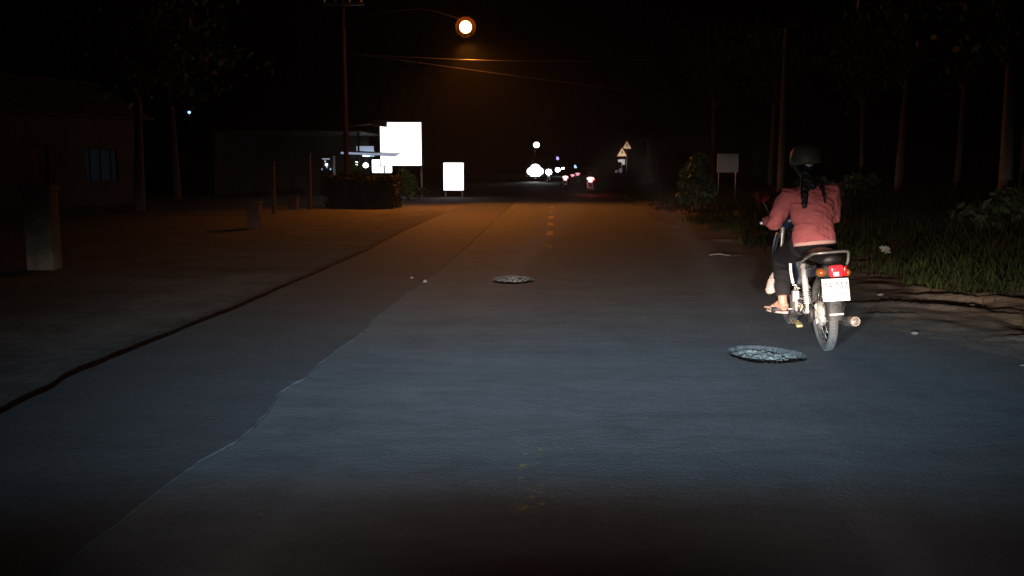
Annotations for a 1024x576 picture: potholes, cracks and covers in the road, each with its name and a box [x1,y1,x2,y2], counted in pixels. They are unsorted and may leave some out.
pothole [491,276,535,284]
pothole [726,345,808,364]
